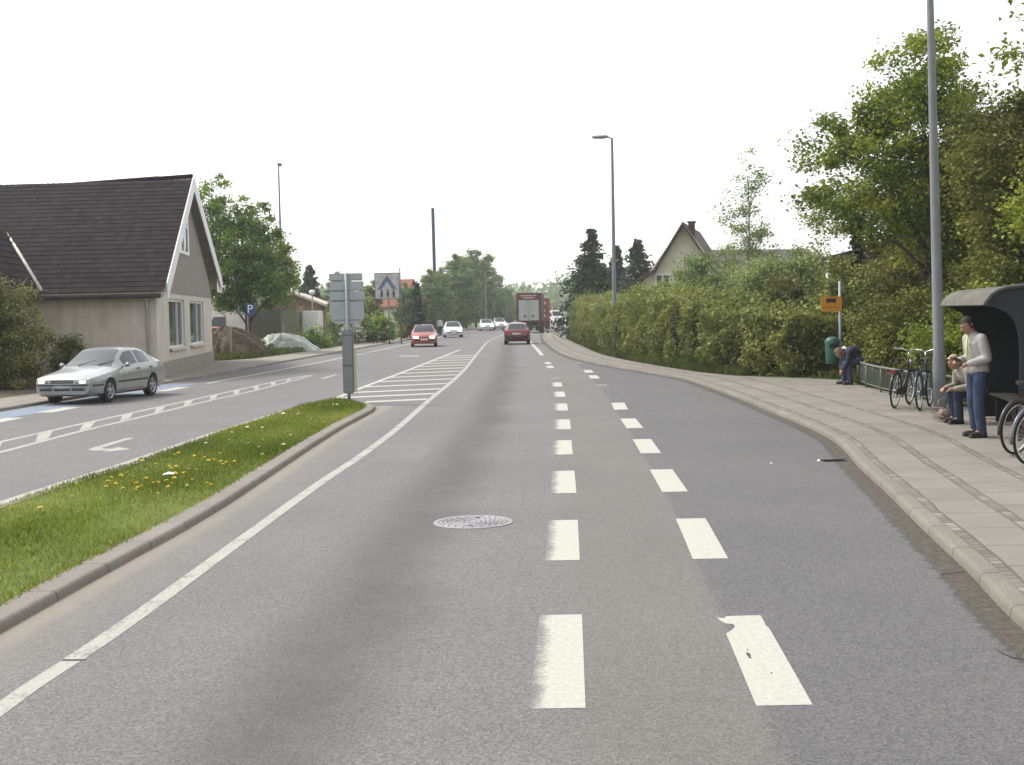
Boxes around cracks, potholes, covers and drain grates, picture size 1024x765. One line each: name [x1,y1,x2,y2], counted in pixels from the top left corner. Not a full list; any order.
manhole cover [433,515,513,529]
